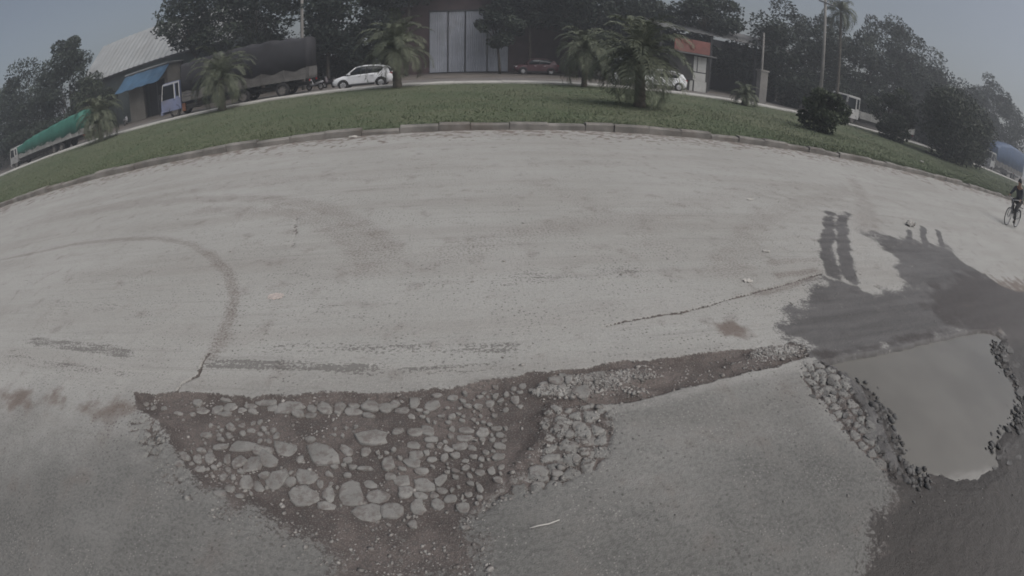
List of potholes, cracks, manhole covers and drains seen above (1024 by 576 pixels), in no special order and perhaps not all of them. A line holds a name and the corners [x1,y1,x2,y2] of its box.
crack [603,273,822,327]
pothole [133,368,578,576]
pothole [809,328,1024,493]
crack [122,352,308,566]
